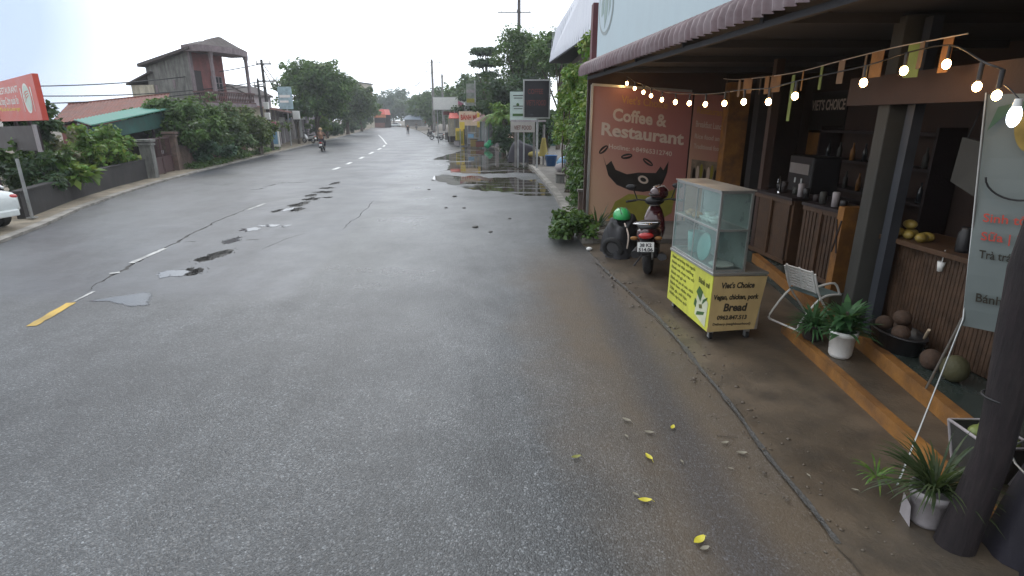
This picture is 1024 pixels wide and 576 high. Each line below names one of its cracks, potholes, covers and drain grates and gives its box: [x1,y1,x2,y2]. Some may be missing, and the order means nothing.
pothole [178,267,209,277]
pothole [189,249,237,264]
